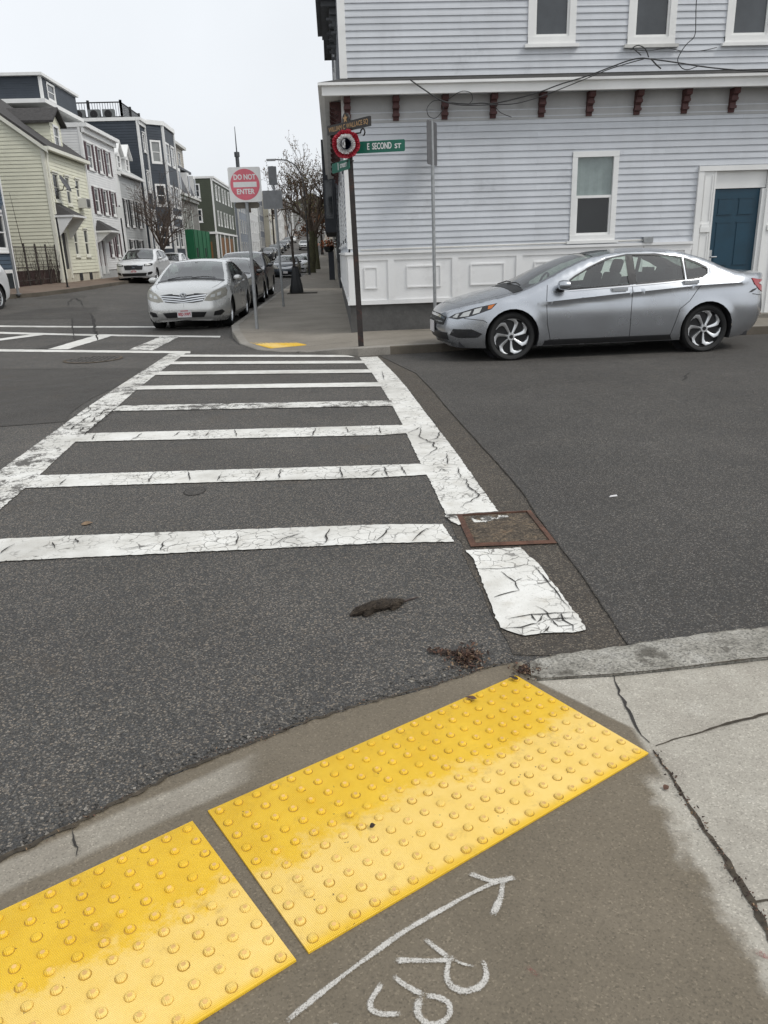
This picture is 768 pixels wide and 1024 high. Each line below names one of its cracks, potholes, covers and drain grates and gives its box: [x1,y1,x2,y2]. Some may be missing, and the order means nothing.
crack [410,427,480,507]
crack [614,676,649,742]
crack [491,564,577,634]
crack [62,404,125,440]
manhole cover [63,355,123,363]
utility cover [456,510,557,546]
